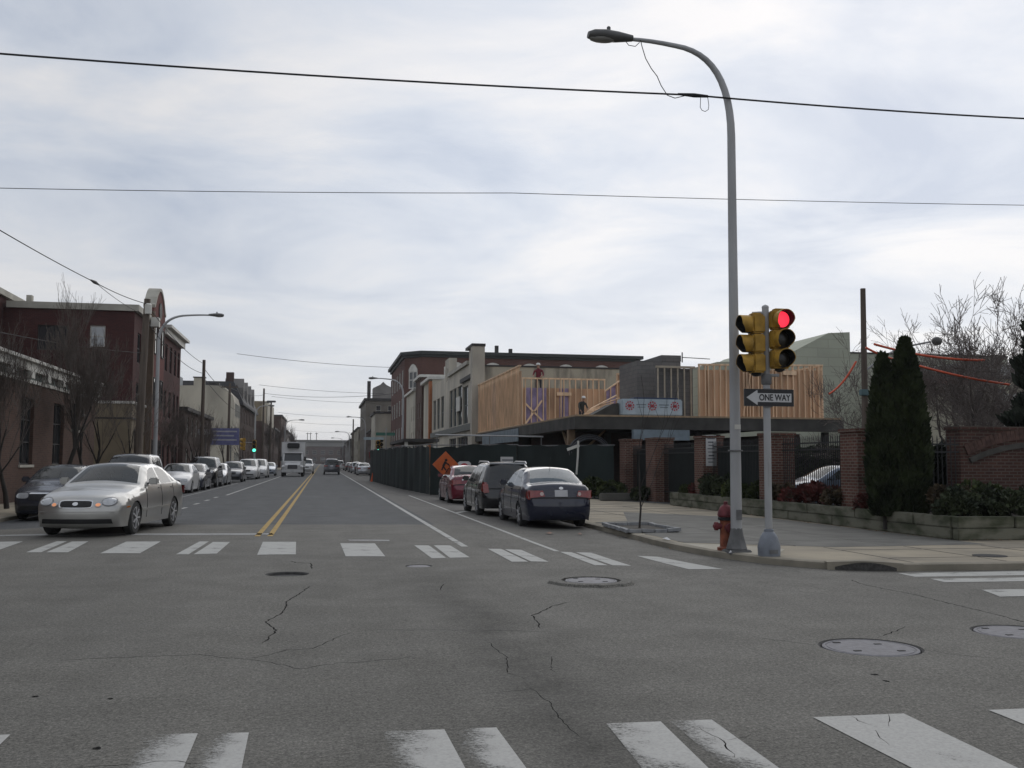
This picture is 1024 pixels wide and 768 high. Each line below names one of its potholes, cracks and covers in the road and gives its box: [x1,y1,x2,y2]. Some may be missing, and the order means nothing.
crack [361,602,579,736]
crack [56,586,411,669]
manhole cover [818,638,925,657]
manhole cover [970,625,1024,639]
manhole cover [547,575,635,588]
drain grate [826,560,904,571]
